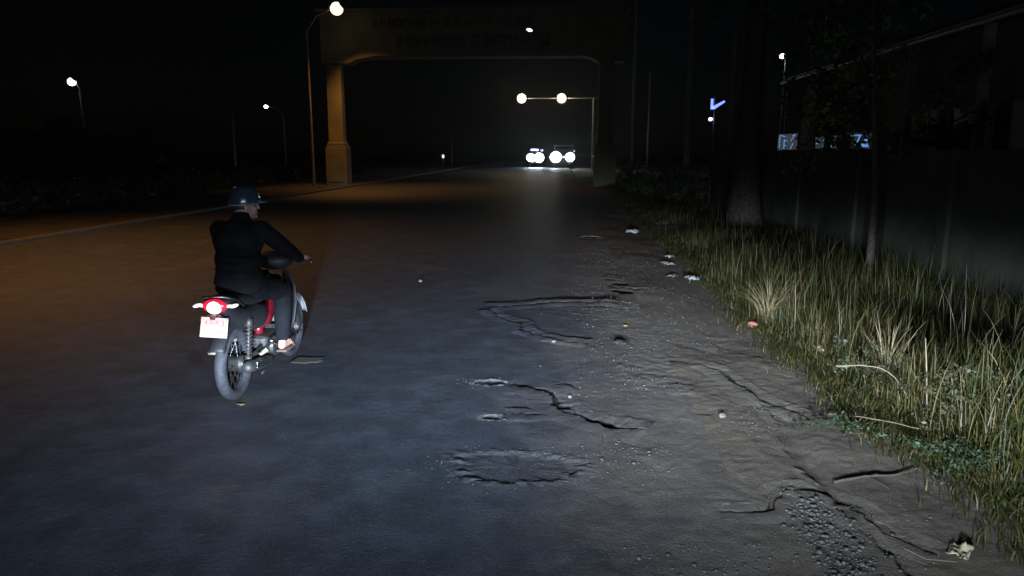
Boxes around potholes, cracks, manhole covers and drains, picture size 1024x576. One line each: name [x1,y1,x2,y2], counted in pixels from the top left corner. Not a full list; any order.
pothole [438,448,604,487]
pothole [477,413,507,421]
crack [503,361,827,444]
